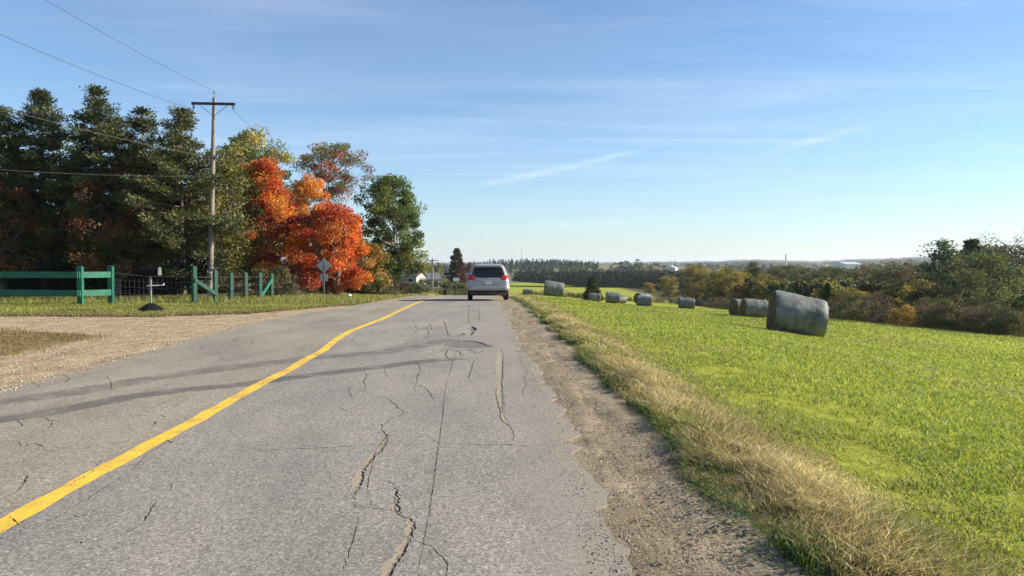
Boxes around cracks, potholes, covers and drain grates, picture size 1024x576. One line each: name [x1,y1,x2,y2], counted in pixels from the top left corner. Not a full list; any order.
crack [1,399,185,539]
crack [255,306,526,576]
